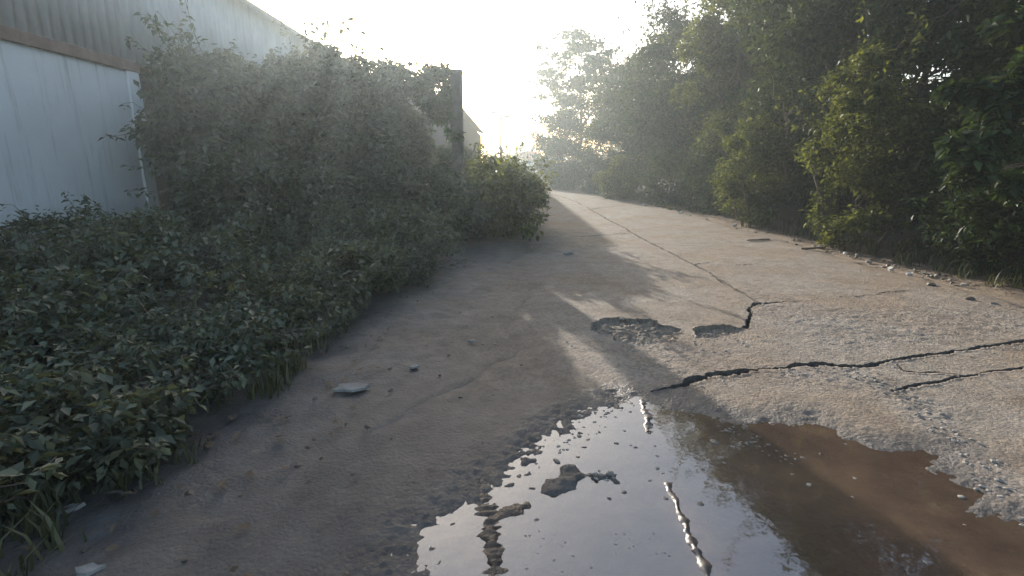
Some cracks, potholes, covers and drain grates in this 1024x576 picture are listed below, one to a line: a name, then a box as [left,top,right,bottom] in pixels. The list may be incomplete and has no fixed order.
crack [651,301,1024,393]
pothole [690,324,745,338]
pothole [587,317,684,345]
